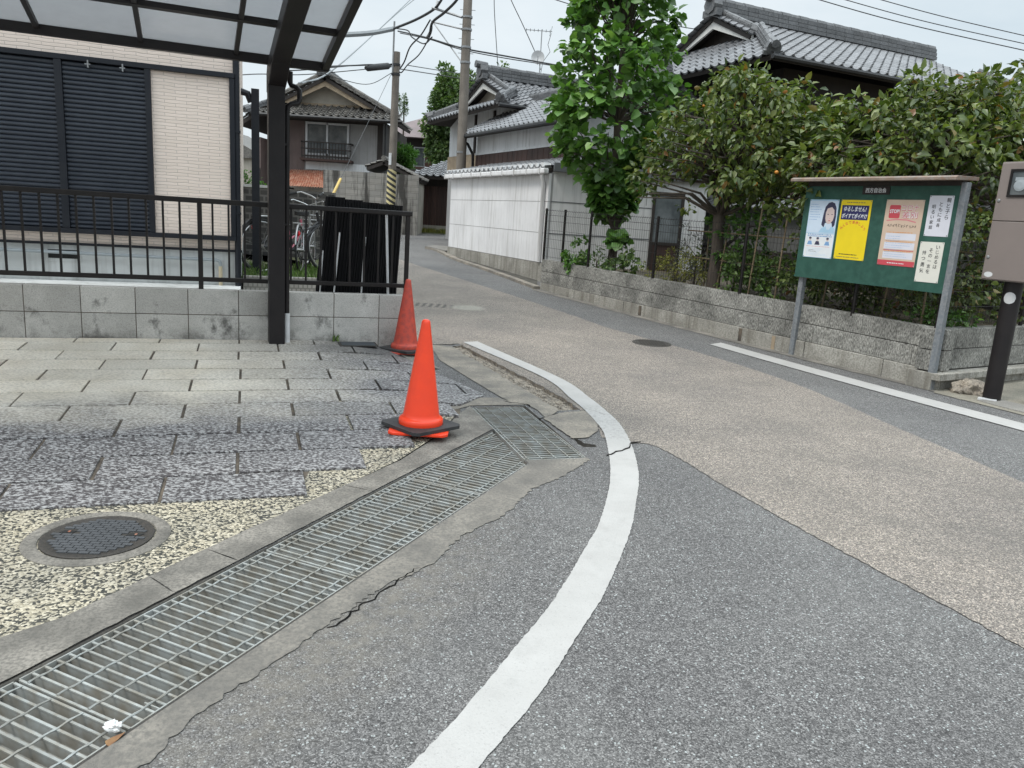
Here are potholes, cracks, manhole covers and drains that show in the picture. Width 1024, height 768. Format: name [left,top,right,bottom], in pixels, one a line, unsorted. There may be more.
crack [607,441,641,456]
drain grate [0,682,126,768]
drain grate [472,407,586,464]
drain grate [266,478,480,578]
manhole cover [632,339,672,347]
drain grate [19,552,356,732]
manhole cover [19,511,171,567]
drain grate [406,432,525,495]
crack [327,567,420,628]
